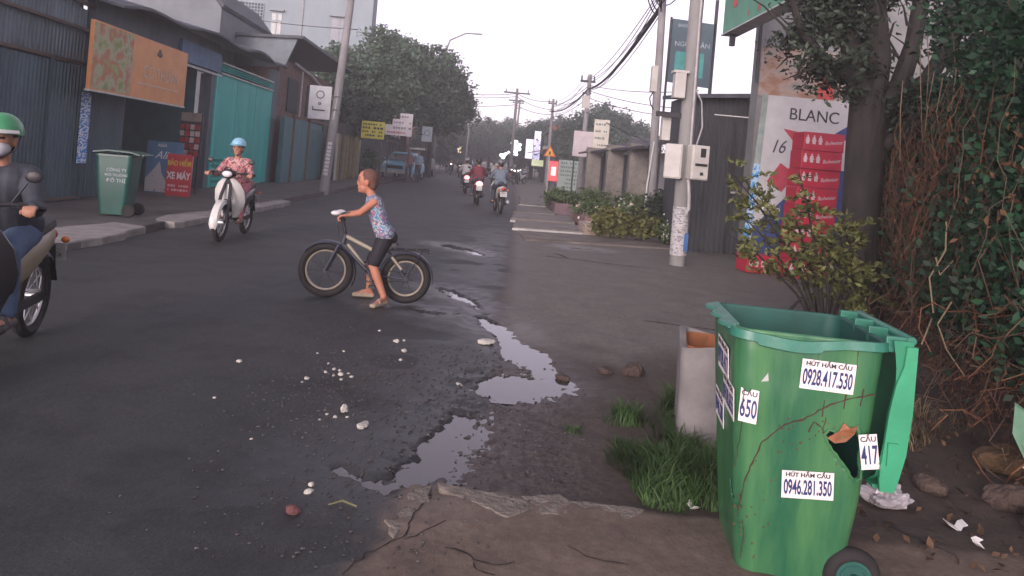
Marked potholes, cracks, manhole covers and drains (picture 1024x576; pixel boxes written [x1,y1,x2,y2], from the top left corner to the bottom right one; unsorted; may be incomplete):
pothole [325,408,481,495]
pothole [471,315,544,378]
crack [444,547,515,575]
pothole [464,373,566,398]
